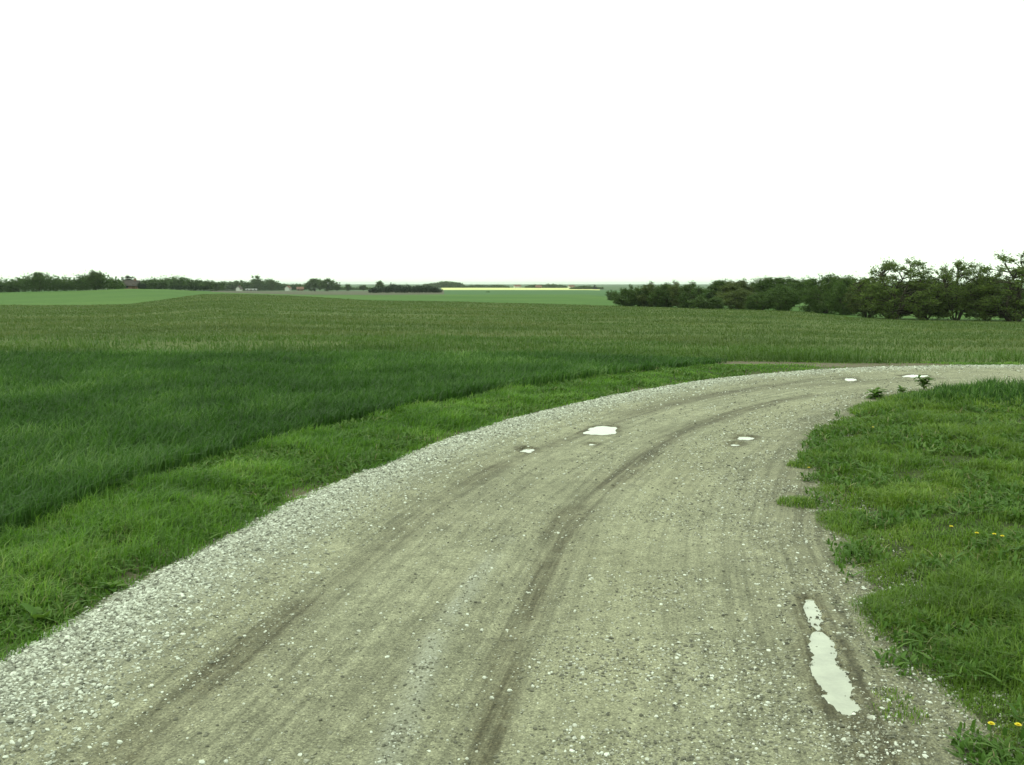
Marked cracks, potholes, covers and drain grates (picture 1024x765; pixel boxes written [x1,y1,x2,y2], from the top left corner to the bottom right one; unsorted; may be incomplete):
pothole [779,591,890,728]
pothole [573,425,627,437]
pothole [510,445,545,455]
pothole [726,434,764,442]
pothole [718,440,754,448]
